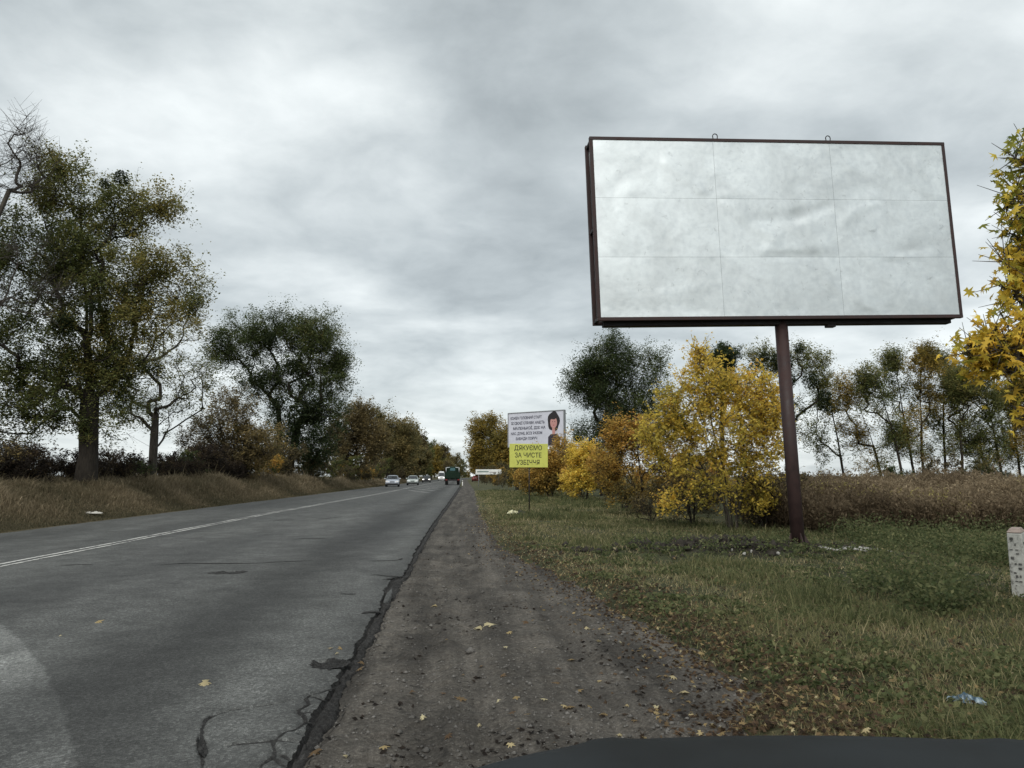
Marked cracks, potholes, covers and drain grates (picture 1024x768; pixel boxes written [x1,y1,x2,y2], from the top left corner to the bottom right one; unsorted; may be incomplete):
crack [73,487,461,768]
